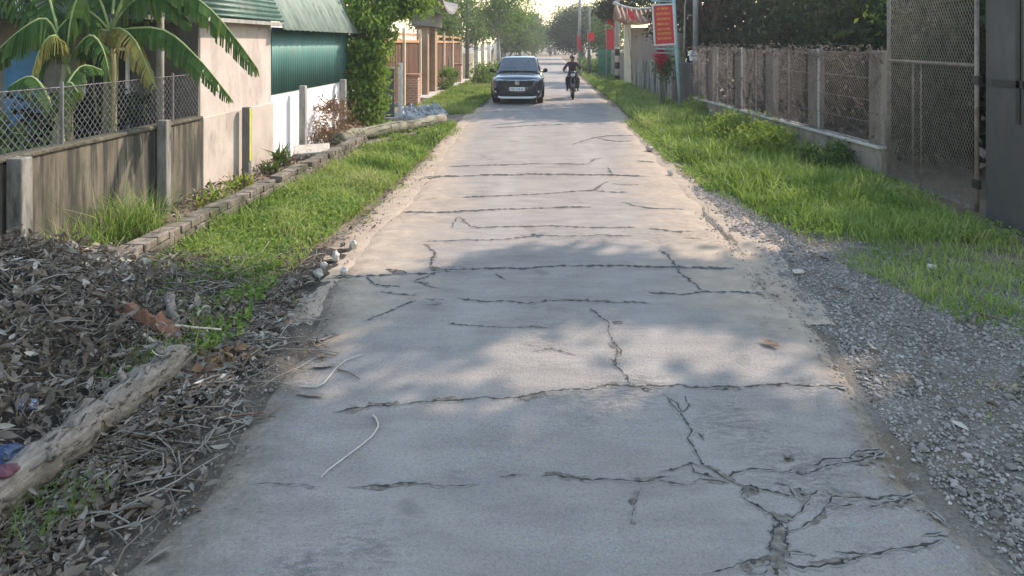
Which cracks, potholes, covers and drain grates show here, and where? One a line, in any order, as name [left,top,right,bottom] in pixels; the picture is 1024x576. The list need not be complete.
crack [332,124,948,576]
